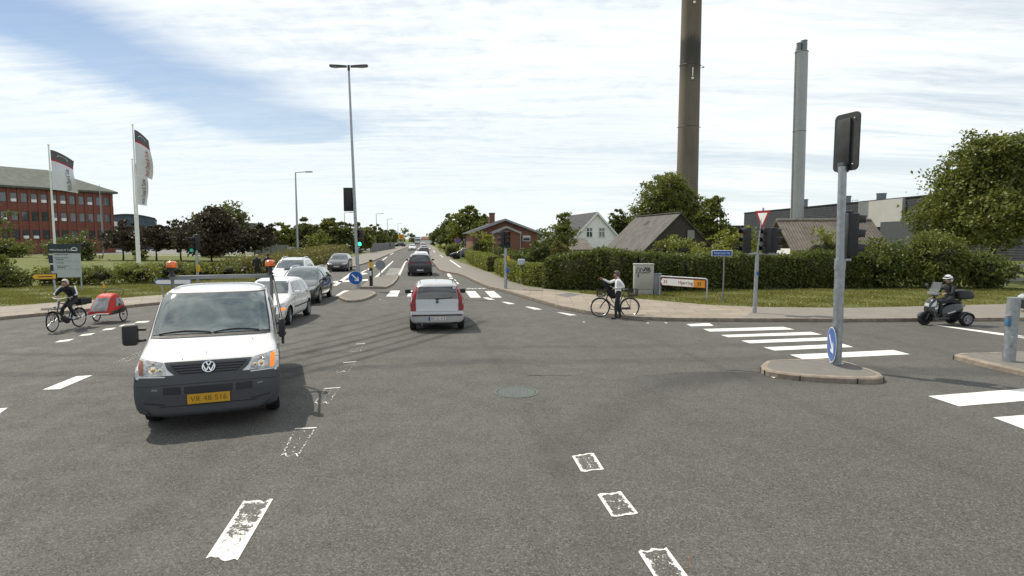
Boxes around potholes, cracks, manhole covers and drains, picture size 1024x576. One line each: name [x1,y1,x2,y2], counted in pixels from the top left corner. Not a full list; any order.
manhole cover [494,386,539,398]
